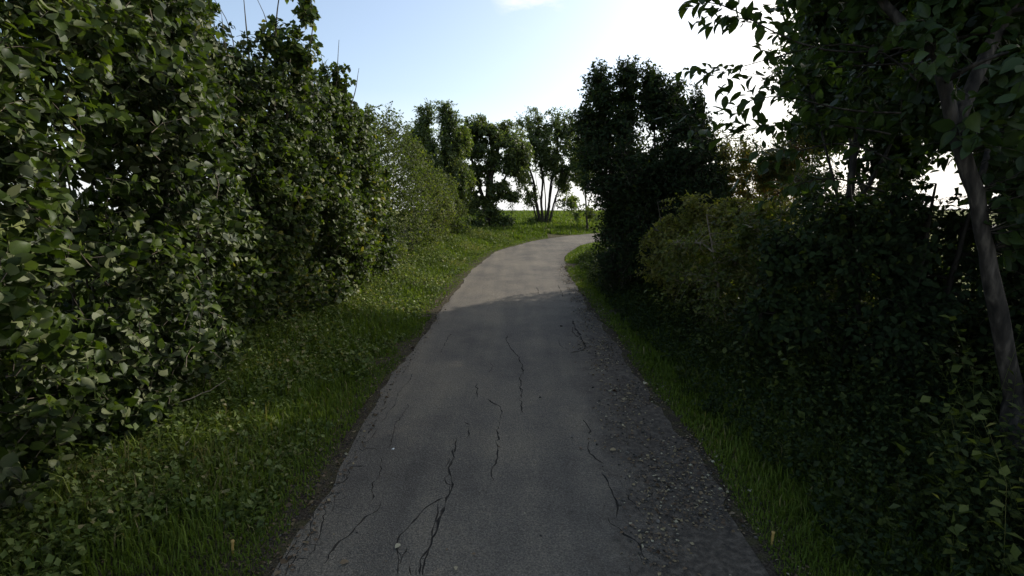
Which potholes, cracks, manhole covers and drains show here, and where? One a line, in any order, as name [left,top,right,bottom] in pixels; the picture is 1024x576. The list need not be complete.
crack [396,422,470,575]
crack [559,321,586,352]
crack [583,420,651,573]
crack [474,336,524,480]
crack [278,374,412,574]
